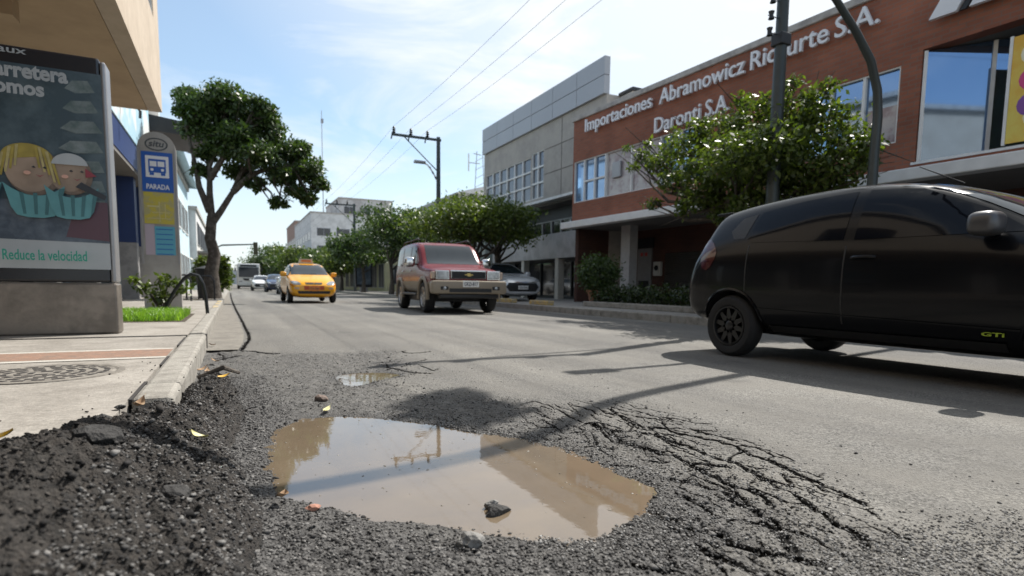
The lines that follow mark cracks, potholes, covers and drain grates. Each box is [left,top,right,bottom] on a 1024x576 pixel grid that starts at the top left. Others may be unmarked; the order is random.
crack [377,351,438,374]
pothole [249,411,676,547]
manhole cover [0,364,126,385]
pothole [330,371,406,387]
